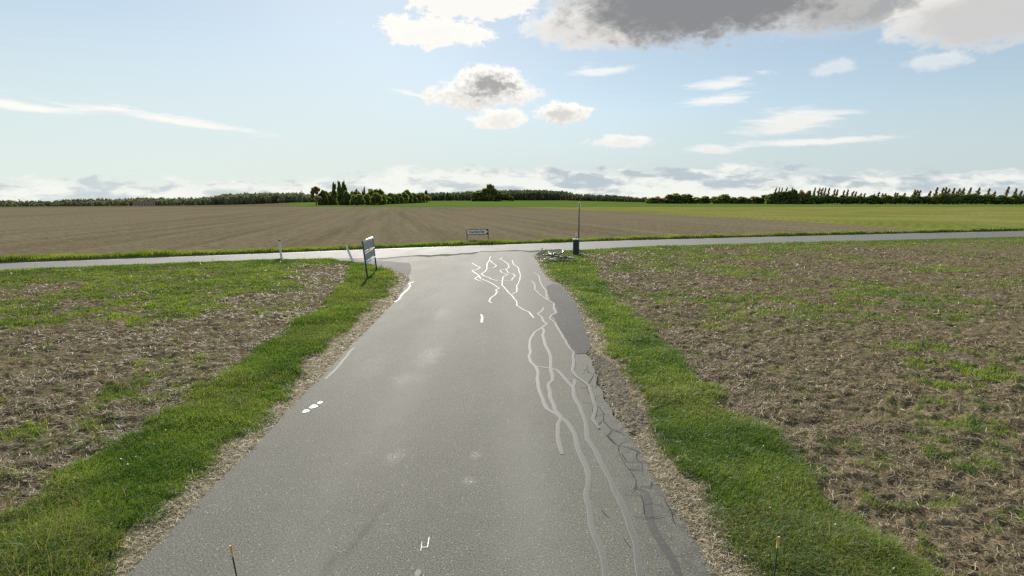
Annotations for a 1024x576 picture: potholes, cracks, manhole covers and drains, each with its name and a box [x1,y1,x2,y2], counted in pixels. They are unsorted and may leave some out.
crack [579,371,686,527]
